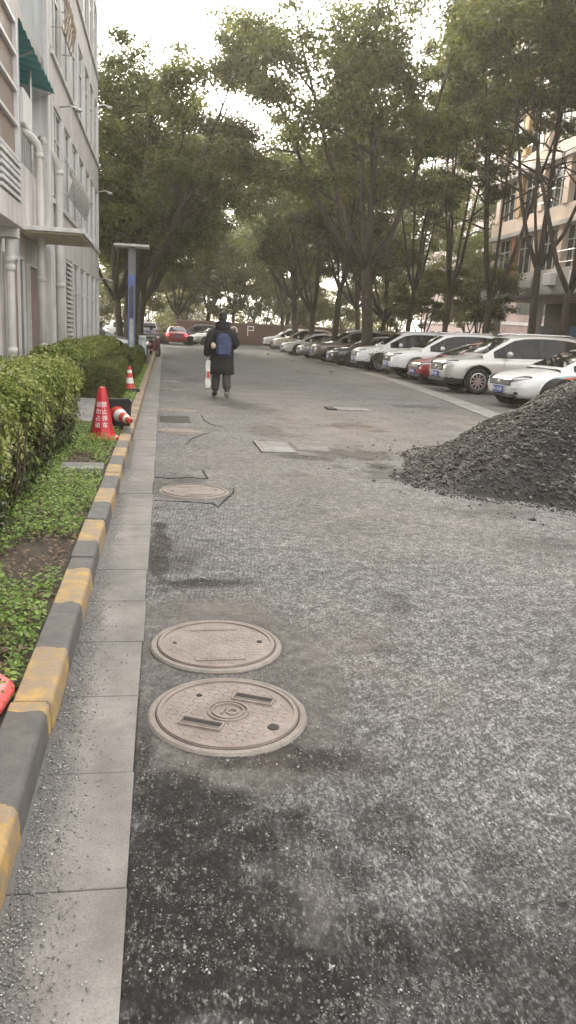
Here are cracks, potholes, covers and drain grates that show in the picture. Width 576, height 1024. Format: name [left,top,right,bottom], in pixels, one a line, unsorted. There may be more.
manhole cover [147,678,307,757]
manhole cover [150,620,282,674]
manhole cover [159,484,229,500]
crack [155,470,235,508]
